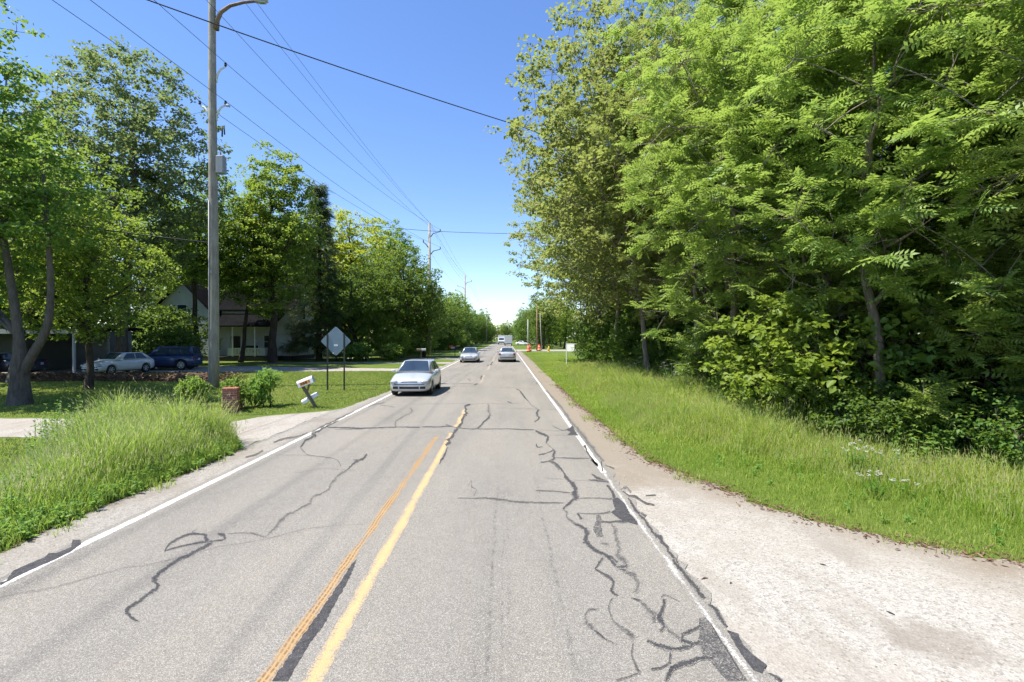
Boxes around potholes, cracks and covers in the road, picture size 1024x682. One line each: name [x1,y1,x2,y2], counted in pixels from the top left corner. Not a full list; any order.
crack [0,383,656,598]
